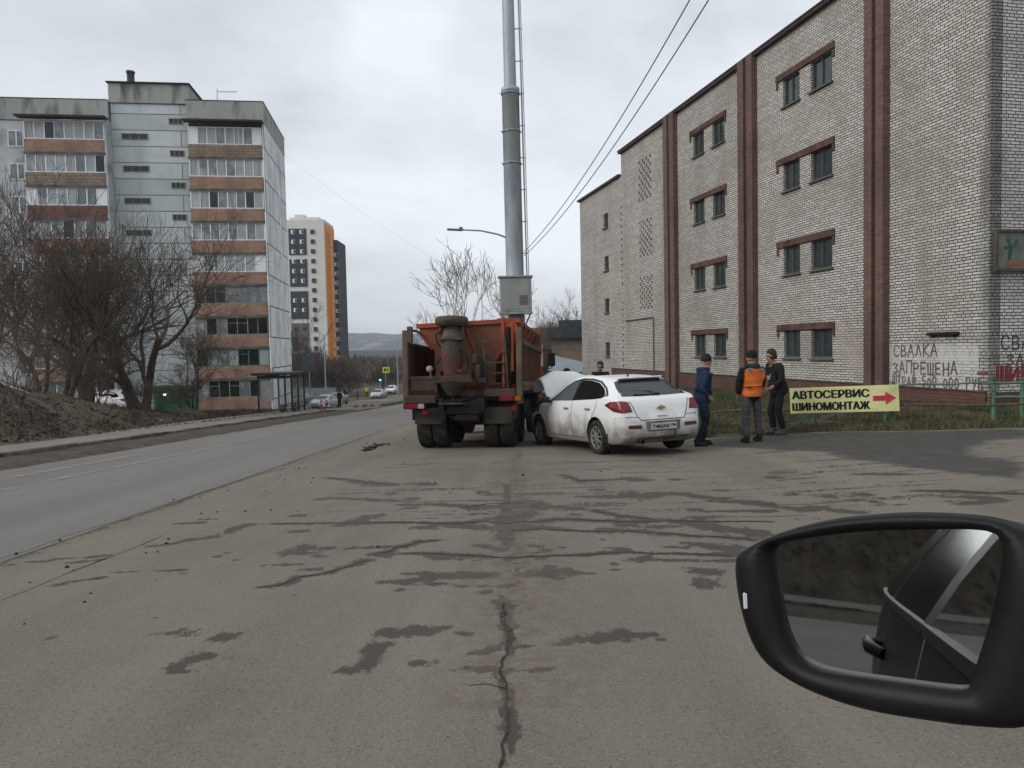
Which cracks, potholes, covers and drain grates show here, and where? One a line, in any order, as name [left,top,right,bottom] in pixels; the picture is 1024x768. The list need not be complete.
crack [468,601,514,768]
